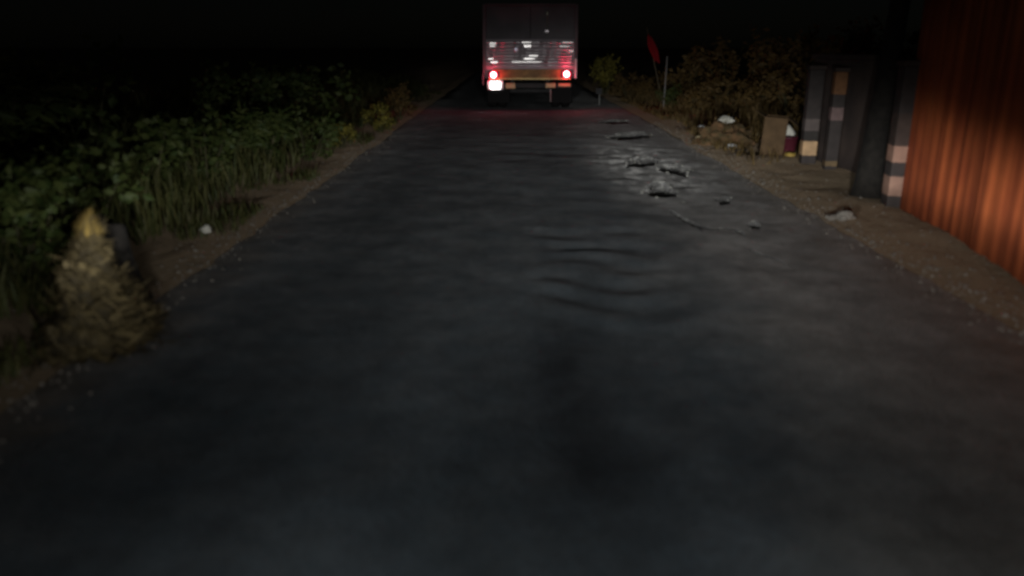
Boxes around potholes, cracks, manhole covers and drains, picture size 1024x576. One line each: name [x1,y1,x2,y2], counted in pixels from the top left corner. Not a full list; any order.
crack [667,201,783,263]
pothole [714,196,733,205]
pothole [655,163,694,177]
pothole [641,181,680,198]
pothole [625,156,662,168]
pothole [607,131,654,140]
